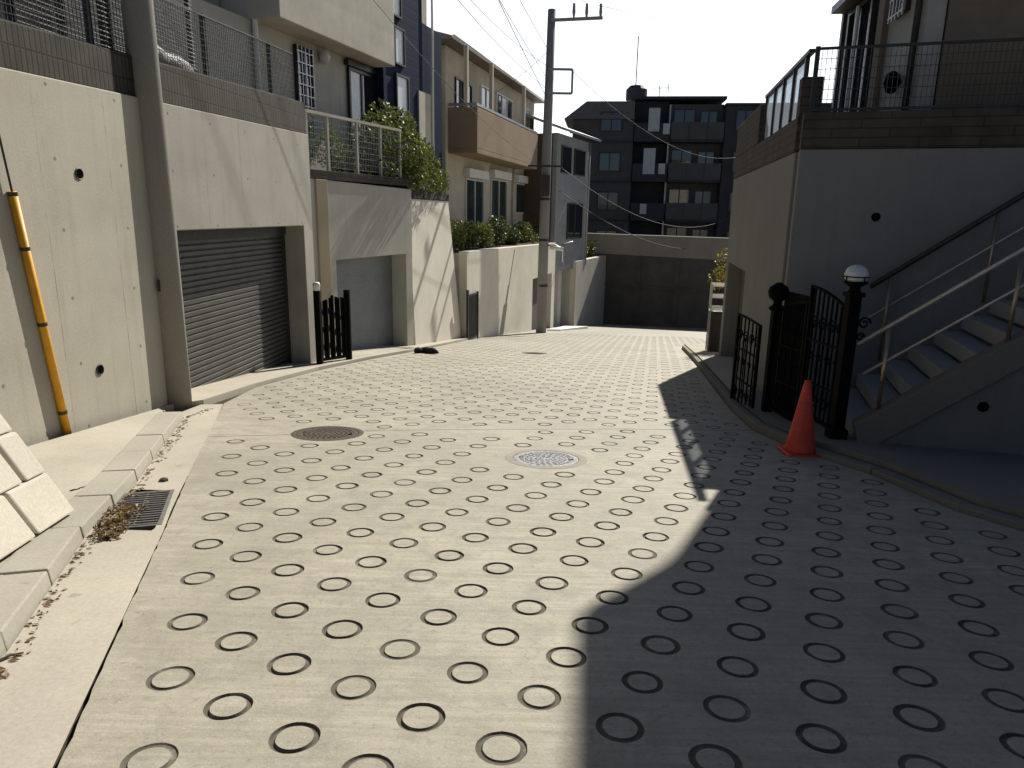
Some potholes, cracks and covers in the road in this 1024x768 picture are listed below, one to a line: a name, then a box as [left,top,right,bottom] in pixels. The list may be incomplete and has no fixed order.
manhole cover [290,426,364,441]
drain grate [102,489,174,531]
manhole cover [505,449,587,469]
